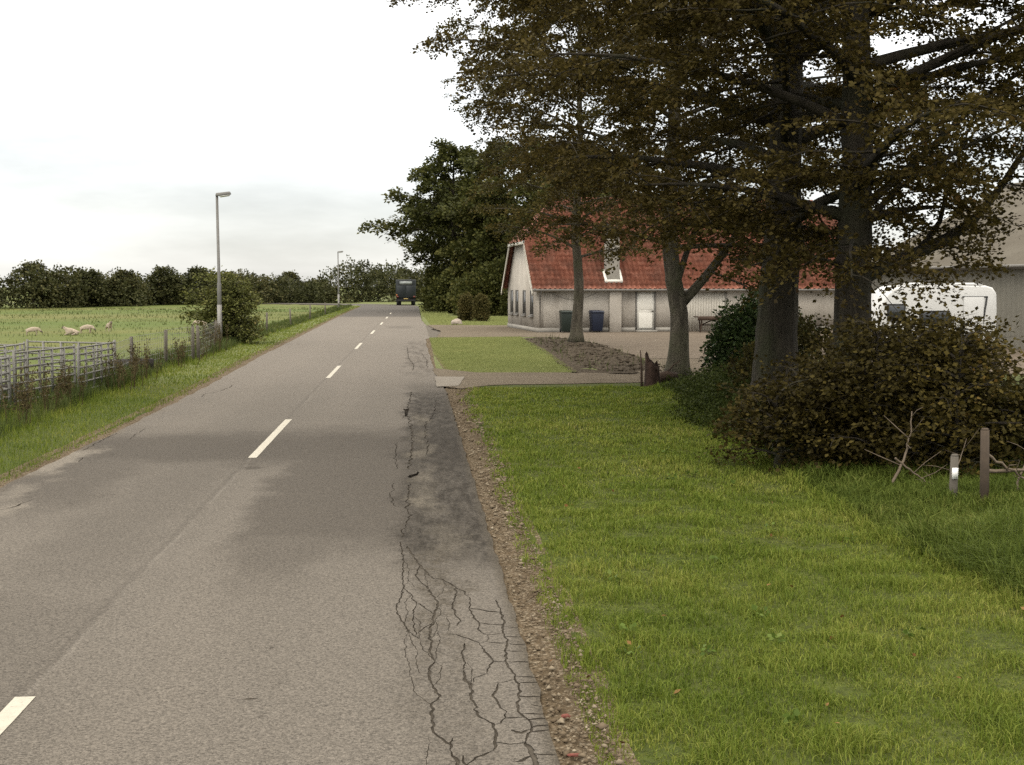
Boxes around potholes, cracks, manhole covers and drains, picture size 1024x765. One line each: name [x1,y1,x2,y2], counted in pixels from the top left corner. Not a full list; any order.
crack [389,392,554,765]
